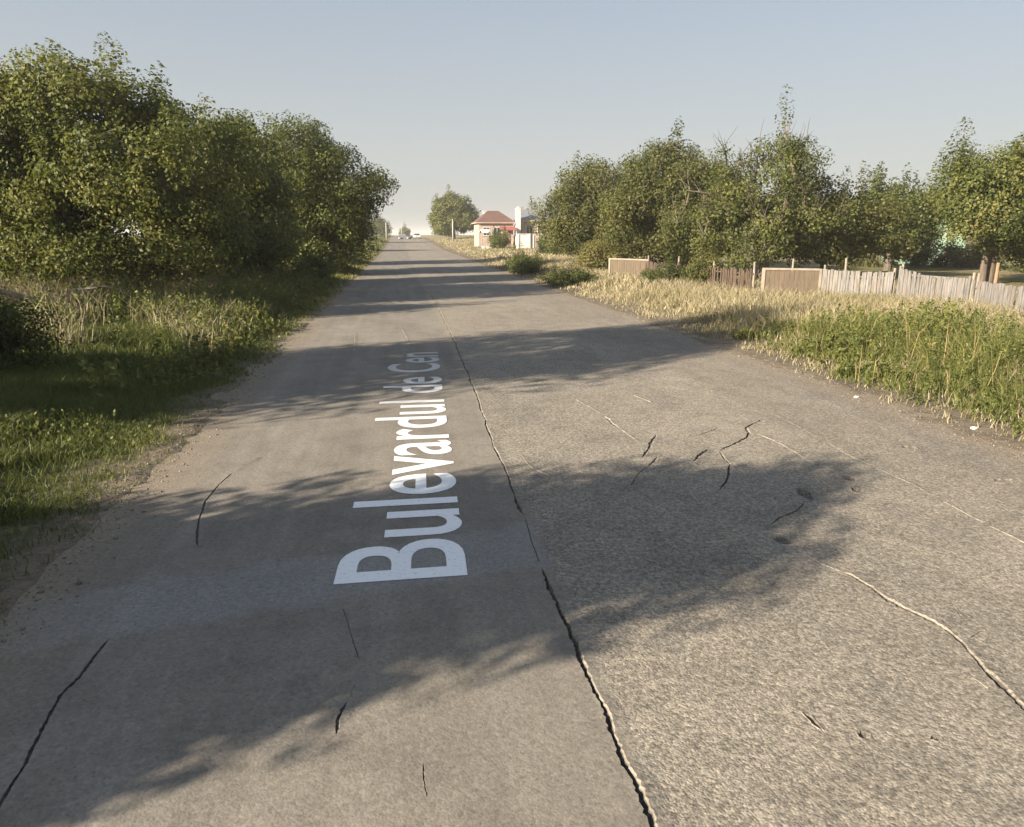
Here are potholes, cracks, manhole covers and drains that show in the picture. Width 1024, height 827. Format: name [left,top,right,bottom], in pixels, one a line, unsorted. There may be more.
crack [193,457,264,547]
crack [804,553,1024,715]
crack [520,395,666,505]
crack [692,419,836,526]
crack [419,763,434,797]
crack [0,639,115,827]
crack [332,609,366,734]
